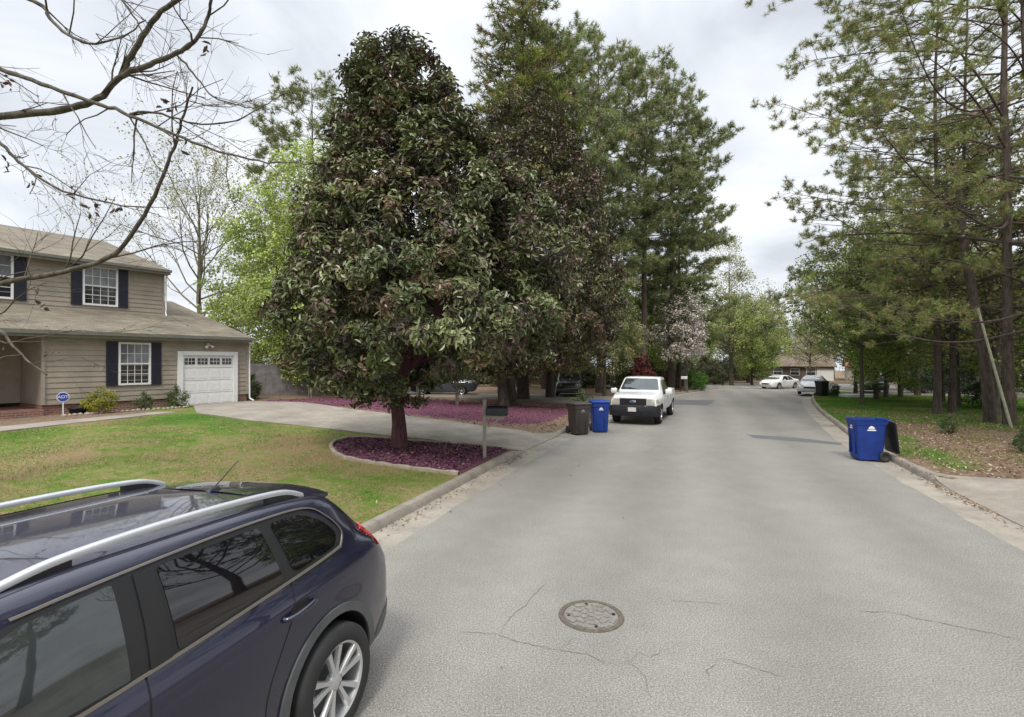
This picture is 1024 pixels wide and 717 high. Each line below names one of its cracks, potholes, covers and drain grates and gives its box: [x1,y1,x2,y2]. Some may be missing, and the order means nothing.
manhole cover [558,600,624,633]
crack [462,582,615,664]
